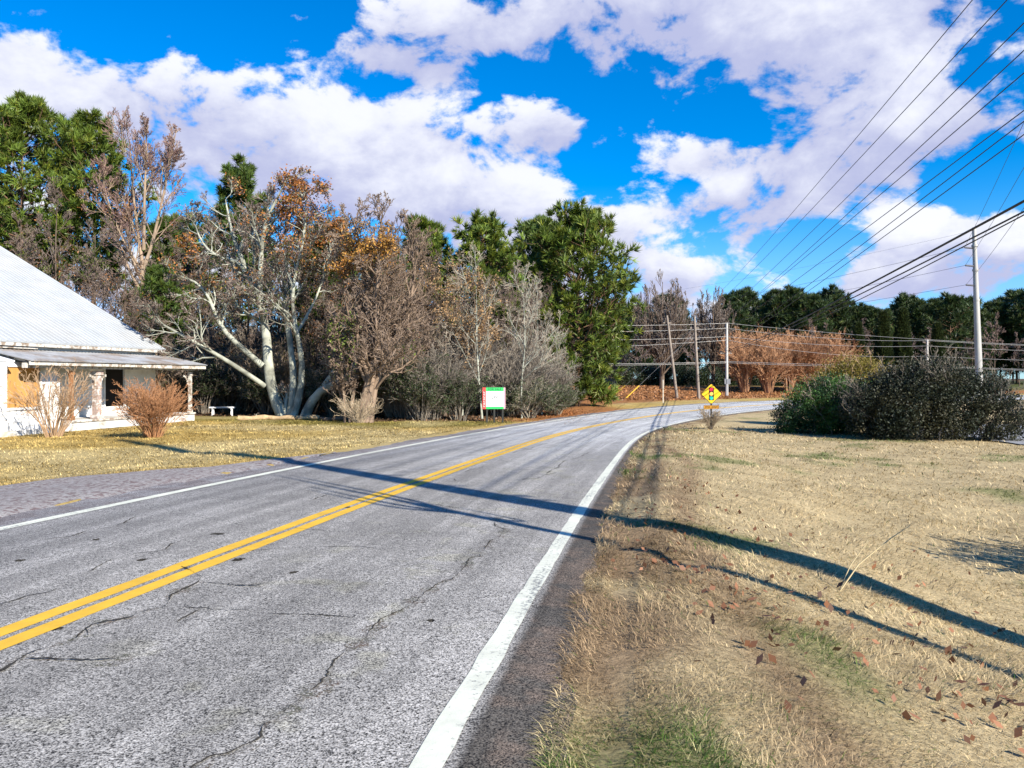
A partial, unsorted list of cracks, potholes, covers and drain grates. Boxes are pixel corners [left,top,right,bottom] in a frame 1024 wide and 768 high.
crack [0,516,511,768]
